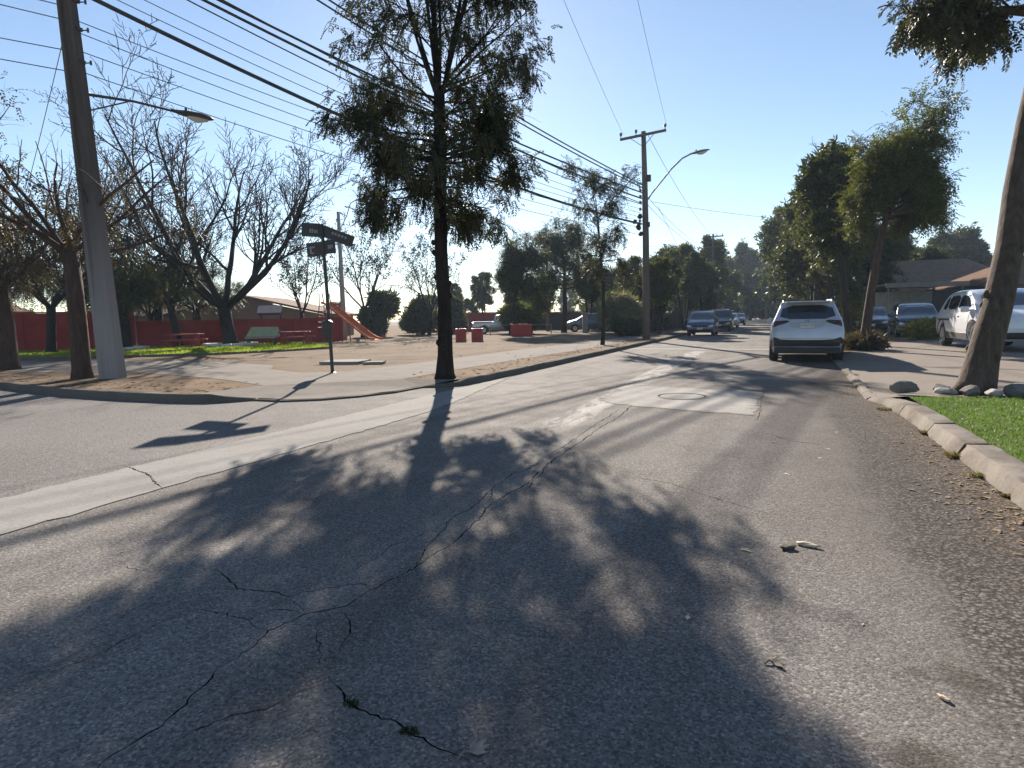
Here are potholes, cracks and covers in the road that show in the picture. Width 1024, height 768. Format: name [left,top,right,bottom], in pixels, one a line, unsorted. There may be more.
crack [40,406,631,768]
